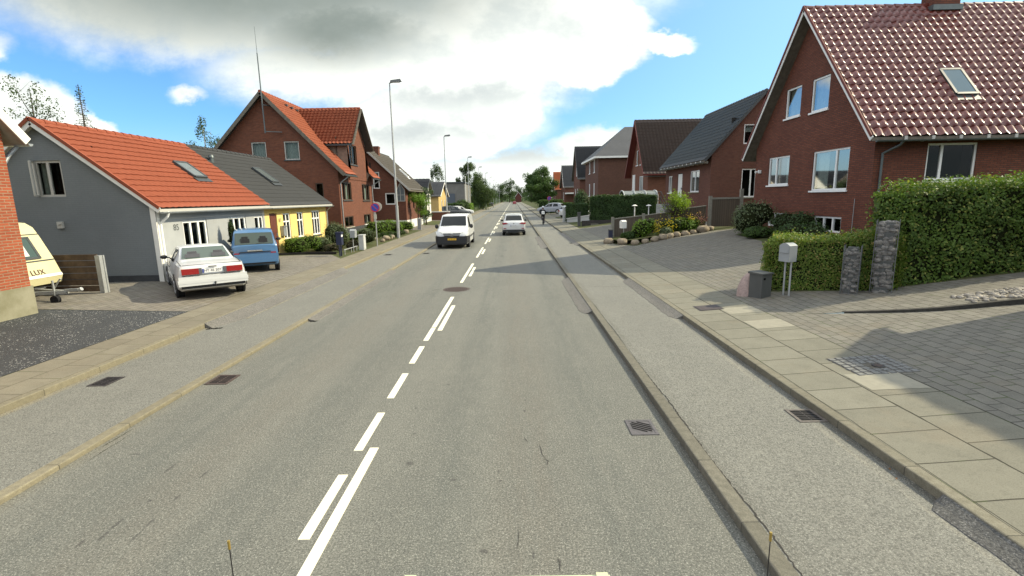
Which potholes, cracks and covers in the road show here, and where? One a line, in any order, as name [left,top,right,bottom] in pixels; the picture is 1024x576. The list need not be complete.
drain grate [624,419,660,436]
drain grate [86,376,125,387]
drain grate [204,374,241,385]
drain grate [784,409,829,423]
